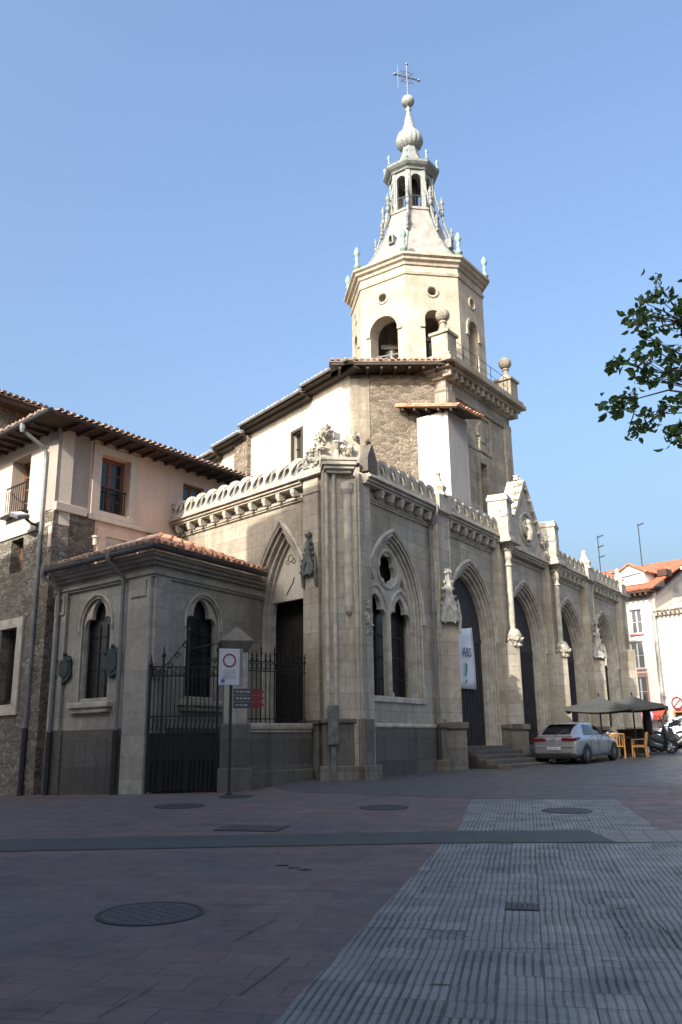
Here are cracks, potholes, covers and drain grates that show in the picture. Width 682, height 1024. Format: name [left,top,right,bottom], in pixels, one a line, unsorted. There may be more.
drain grate [505,902,540,911]
manhole cover [95,901,204,926]
